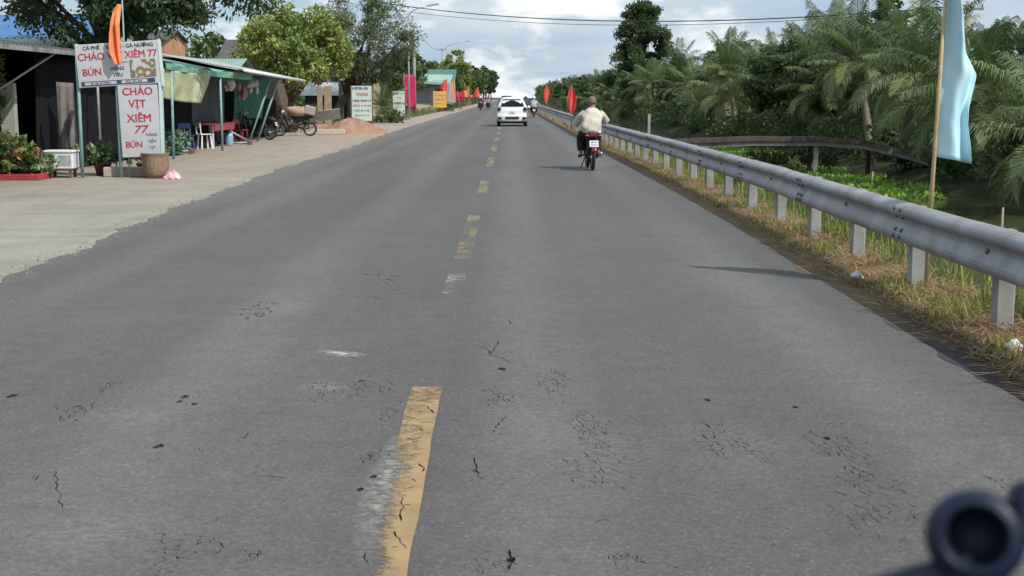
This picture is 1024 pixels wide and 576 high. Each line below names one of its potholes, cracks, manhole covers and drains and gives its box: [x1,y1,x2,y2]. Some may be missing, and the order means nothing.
crack [240,302,281,320]
crack [692,417,775,465]
crack [308,376,433,481]
crack [55,382,123,424]
crack [482,319,513,435]
crack [608,552,650,571]
crack [31,471,63,507]
crack [538,370,636,524]
crack [145,533,224,576]
crack [803,423,926,543]
